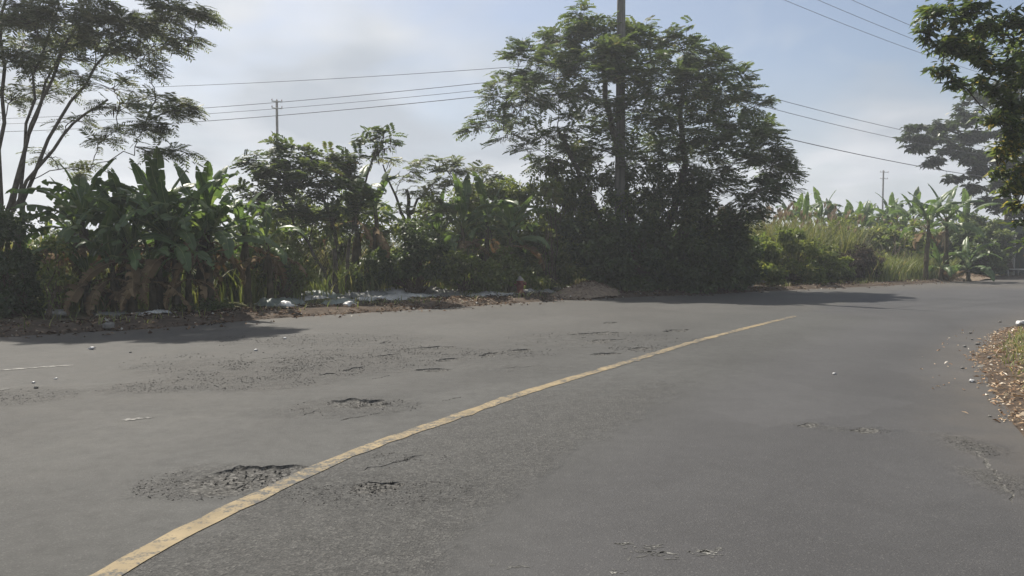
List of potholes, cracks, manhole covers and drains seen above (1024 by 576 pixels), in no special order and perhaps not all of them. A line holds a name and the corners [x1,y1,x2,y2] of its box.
pothole [327,398,392,409]
crack [364,455,422,471]
crack [956,437,1015,502]
pothole [181,464,309,497]
pothole [350,481,405,494]
